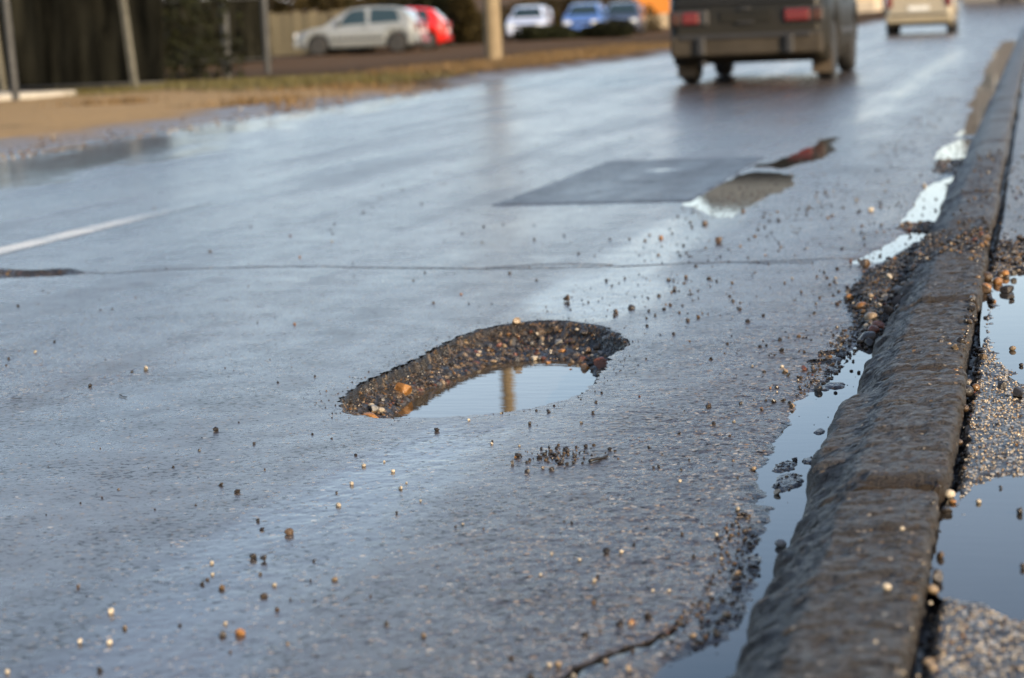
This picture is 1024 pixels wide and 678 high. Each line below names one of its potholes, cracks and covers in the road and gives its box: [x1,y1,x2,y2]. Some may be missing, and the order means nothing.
crack [557,626,685,678]
pothole [337,320,630,419]
